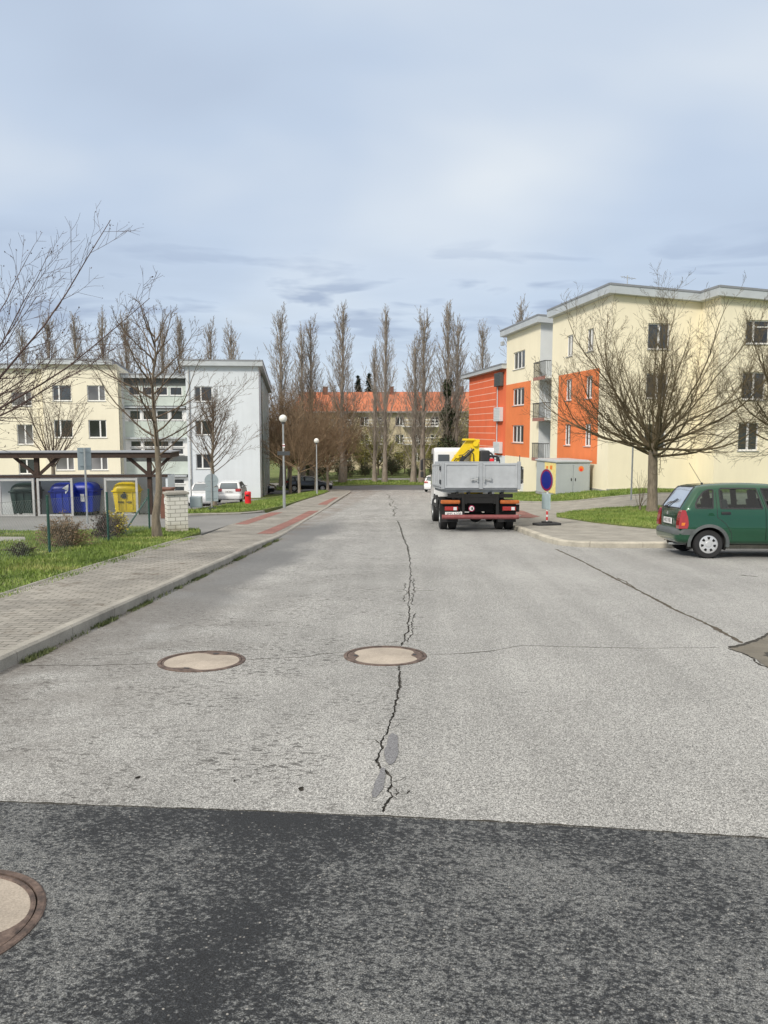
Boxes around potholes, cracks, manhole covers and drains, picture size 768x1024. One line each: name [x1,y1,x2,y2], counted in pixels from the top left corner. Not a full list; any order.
crack [387,494,434,646]
crack [364,666,413,812]
manhole cover [344,646,427,666]
manhole cover [0,869,46,955]
manhole cover [157,651,246,672]
crack [458,645,714,654]
